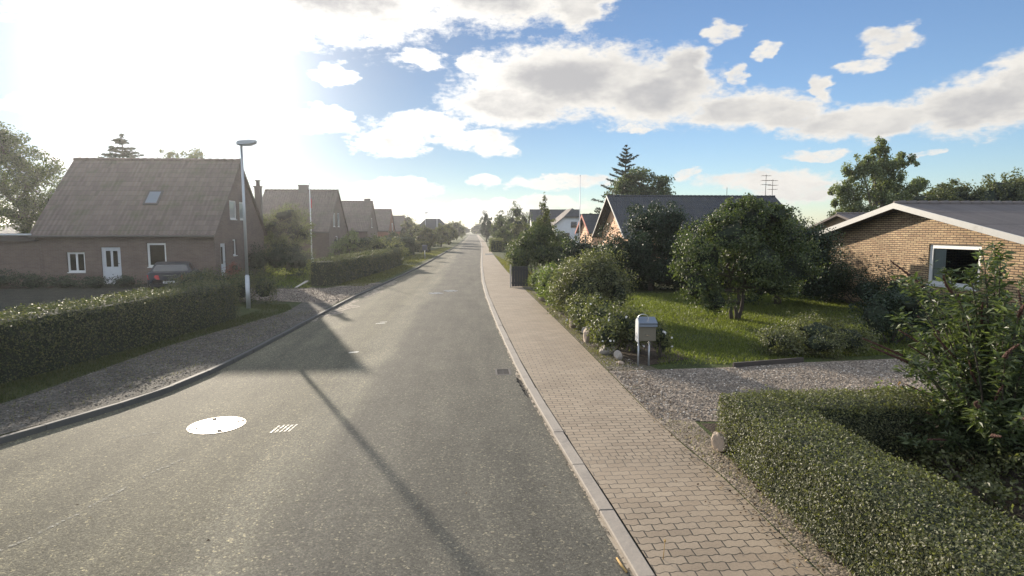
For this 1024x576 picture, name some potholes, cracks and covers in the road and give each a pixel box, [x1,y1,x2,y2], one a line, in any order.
manhole cover [187,416,246,434]
